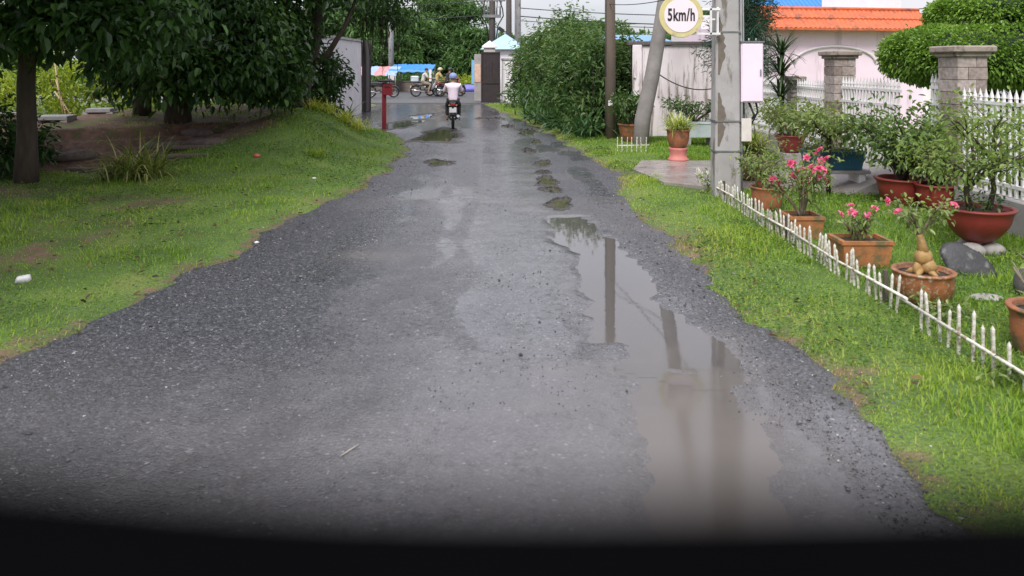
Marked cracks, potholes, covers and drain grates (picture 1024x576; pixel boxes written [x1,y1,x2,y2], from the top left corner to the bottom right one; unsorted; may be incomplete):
pothole [423,158,457,167]
pothole [405,127,465,144]
pothole [543,195,574,211]
pothole [532,159,552,167]
pothole [535,174,561,187]
